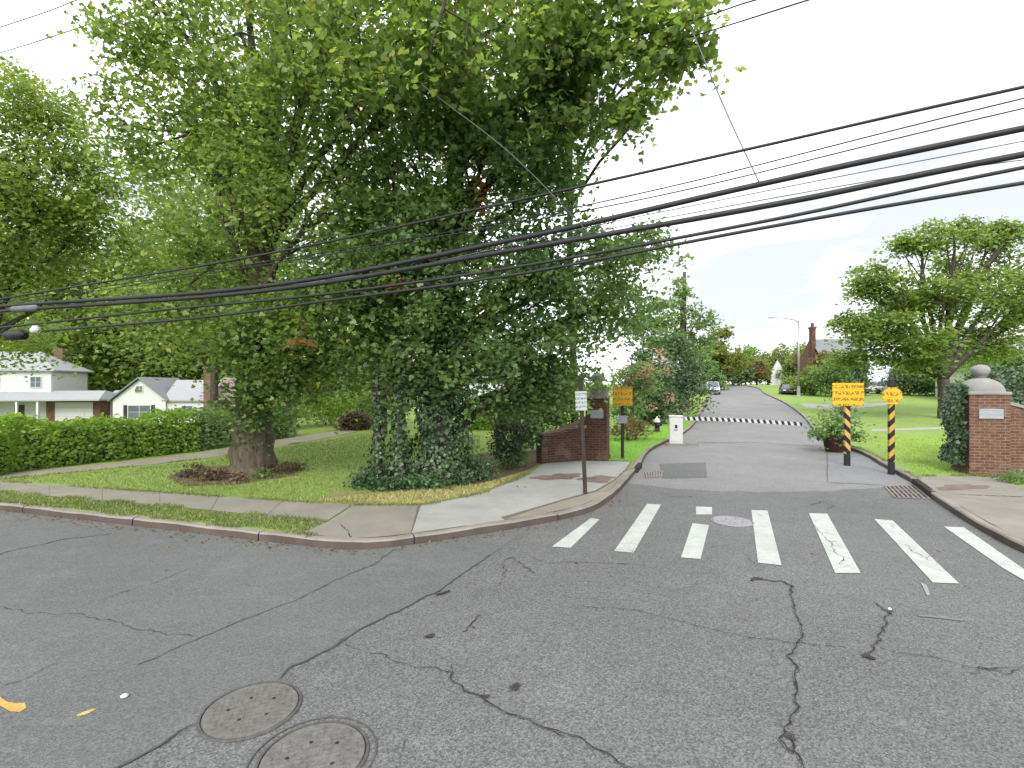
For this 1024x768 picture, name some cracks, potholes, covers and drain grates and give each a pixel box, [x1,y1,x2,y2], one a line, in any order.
crack [866,601,1020,674]
manhole cover [246,716,378,768]
crack [2,606,194,637]
manhole cover [711,516,754,527]
crack [345,644,634,768]
drain grate [884,478,941,499]
drain grate [631,462,663,478]
manhole cover [196,681,303,742]
crack [596,555,844,768]
